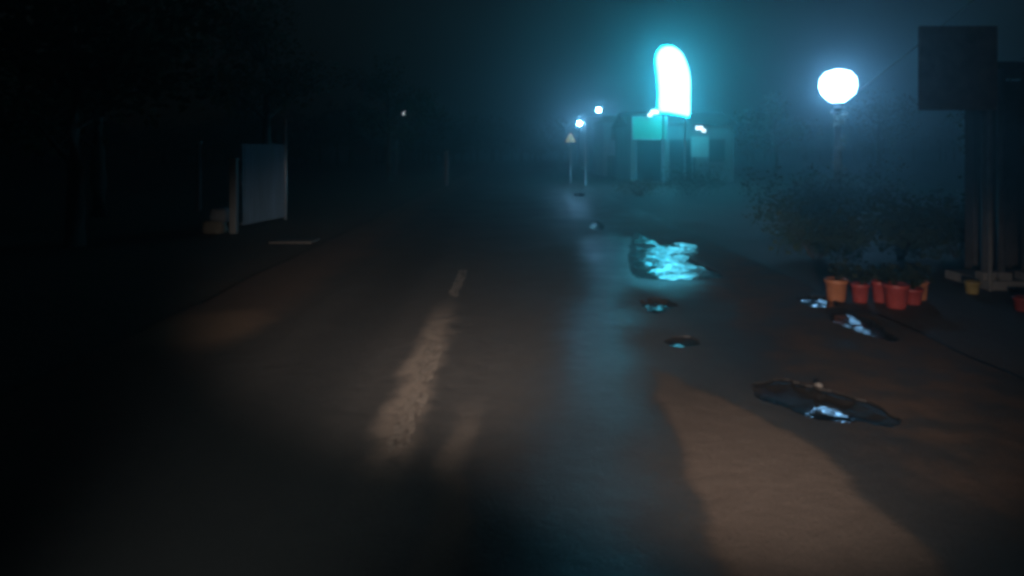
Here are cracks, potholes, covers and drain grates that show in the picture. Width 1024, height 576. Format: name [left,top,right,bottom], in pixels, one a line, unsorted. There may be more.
pothole [664,336,700,347]
pothole [640,298,678,313]
pothole [749,379,902,428]
pothole [795,296,839,307]
pothole [827,308,900,342]
pothole [628,232,723,281]
